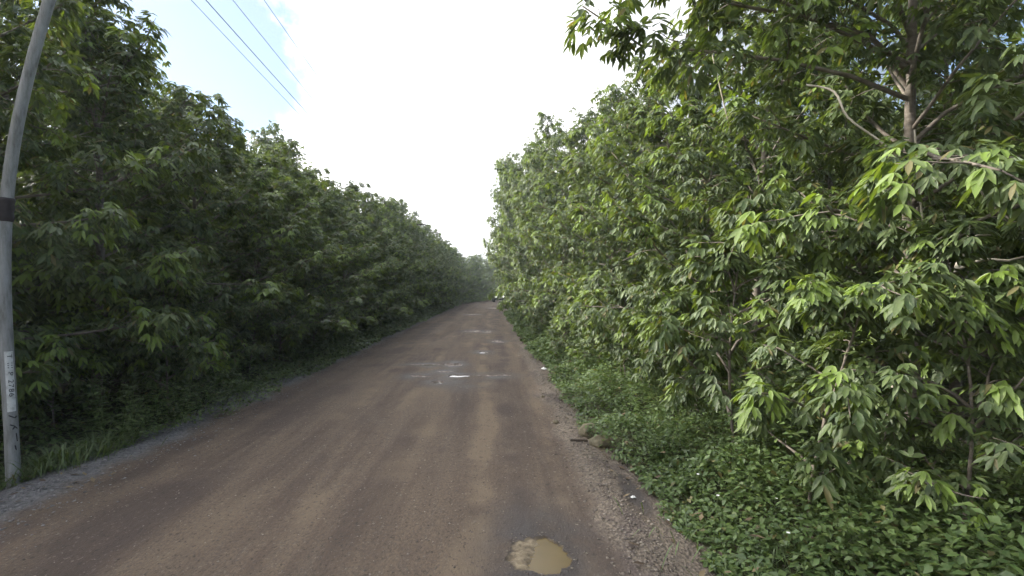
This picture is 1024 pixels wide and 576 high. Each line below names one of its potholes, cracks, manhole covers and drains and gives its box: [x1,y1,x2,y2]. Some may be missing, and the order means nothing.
pothole [497,531,579,576]
